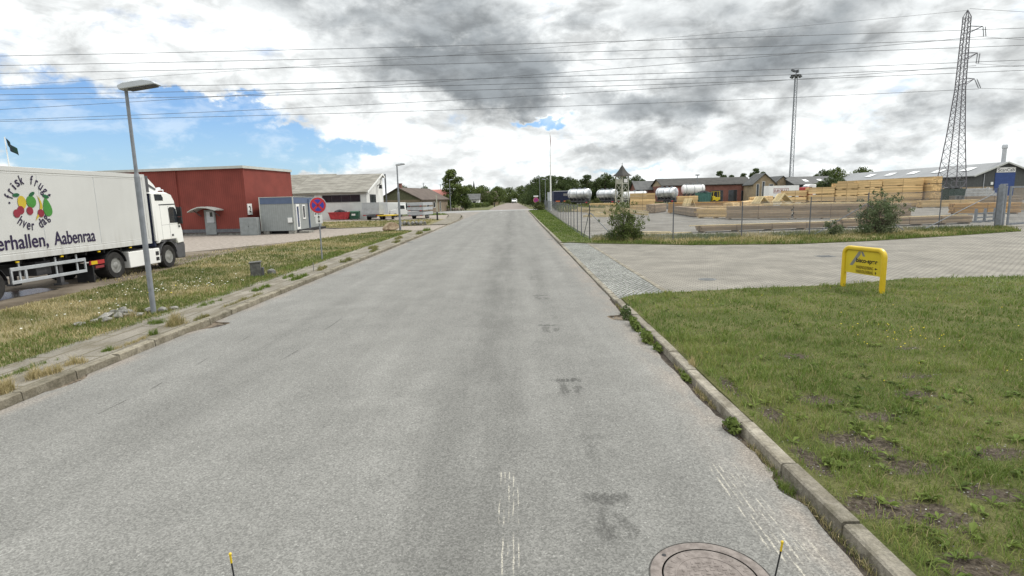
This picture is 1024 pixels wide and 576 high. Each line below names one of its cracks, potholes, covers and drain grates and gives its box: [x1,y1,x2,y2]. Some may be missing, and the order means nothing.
manhole cover [649,542,770,576]
